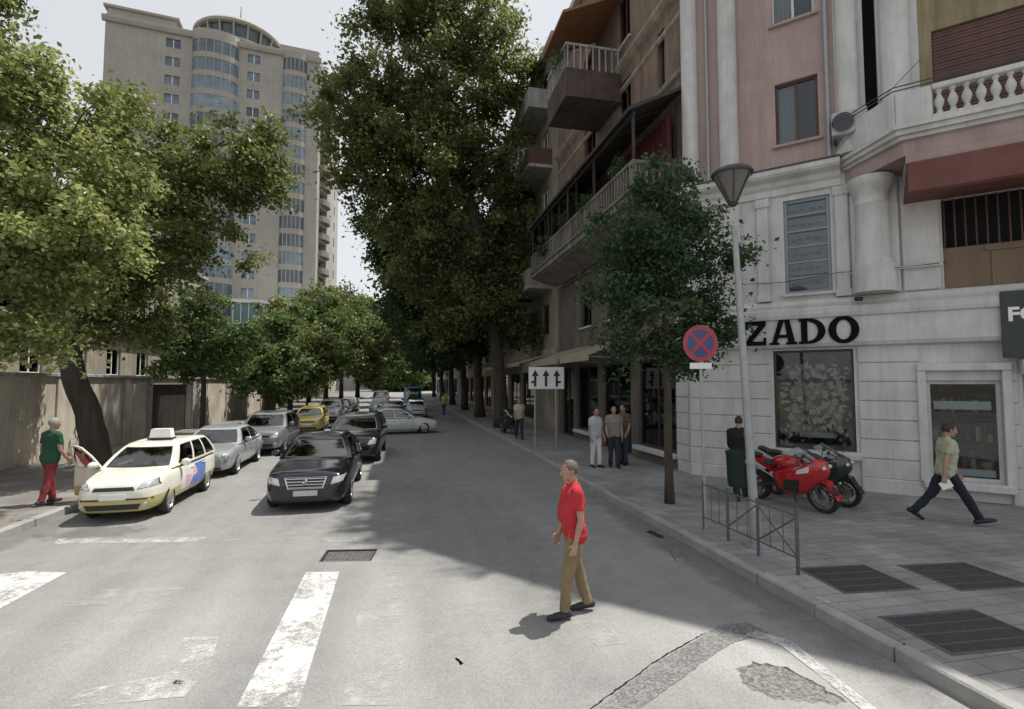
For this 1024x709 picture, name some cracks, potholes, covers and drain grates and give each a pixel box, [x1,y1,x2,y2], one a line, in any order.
crack [668,544,692,563]
drain grate [896,562,1024,591]
drain grate [800,564,921,594]
drain grate [877,609,1024,656]
